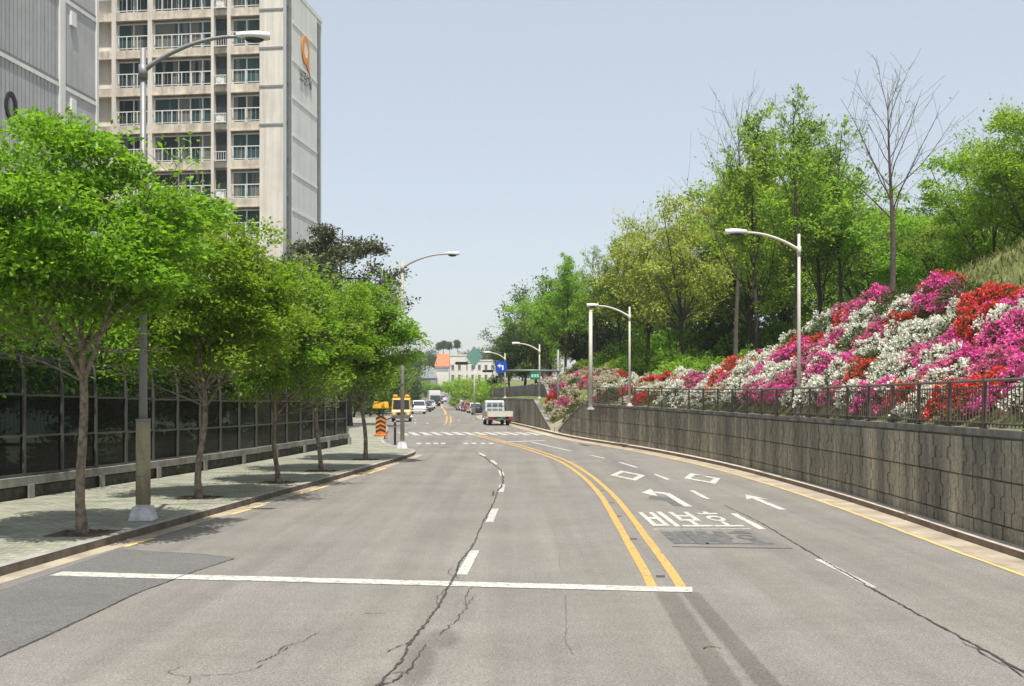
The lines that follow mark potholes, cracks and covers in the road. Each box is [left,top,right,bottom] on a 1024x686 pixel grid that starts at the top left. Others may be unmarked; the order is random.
crack [168,633,316,683]
crack [725,505,1024,677]
crack [375,455,504,686]
